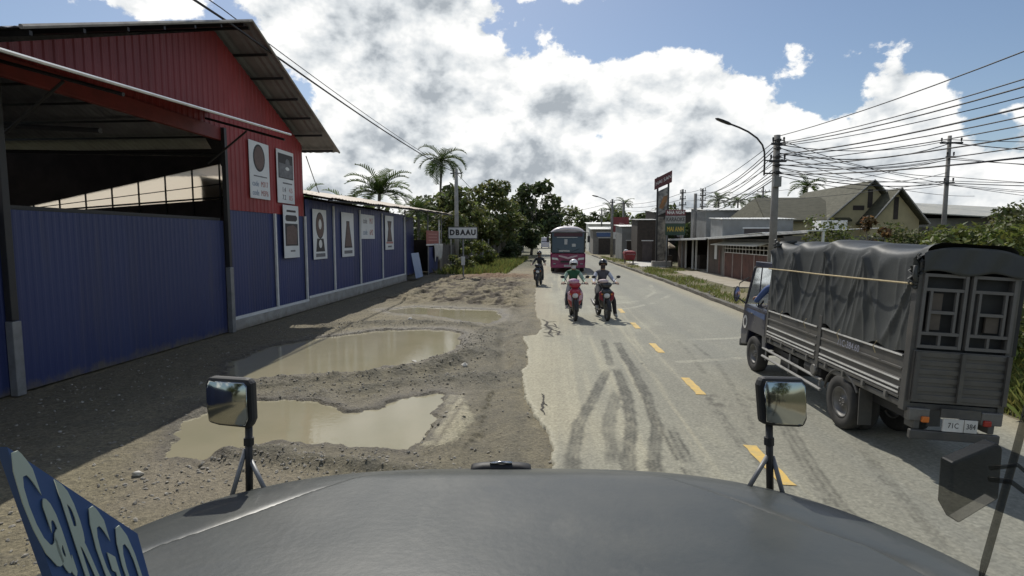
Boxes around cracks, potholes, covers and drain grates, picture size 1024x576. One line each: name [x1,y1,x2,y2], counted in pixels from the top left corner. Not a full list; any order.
crack [542,319,560,337]
pothole [160,390,448,461]
pothole [378,306,504,324]
pothole [222,328,466,379]
